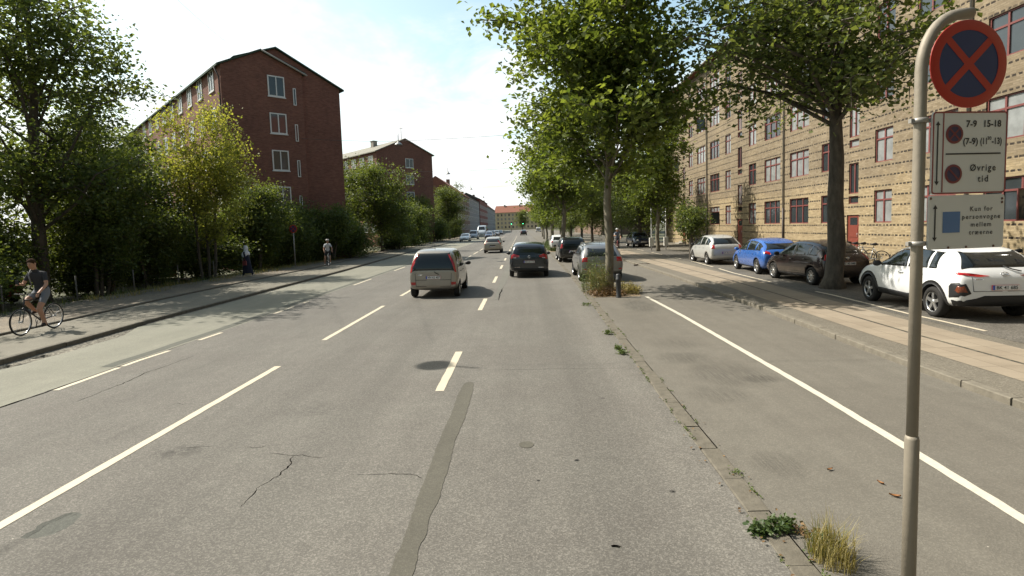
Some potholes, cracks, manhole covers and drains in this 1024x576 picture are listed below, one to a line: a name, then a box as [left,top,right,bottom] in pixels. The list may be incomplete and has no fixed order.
crack [241,446,324,506]
